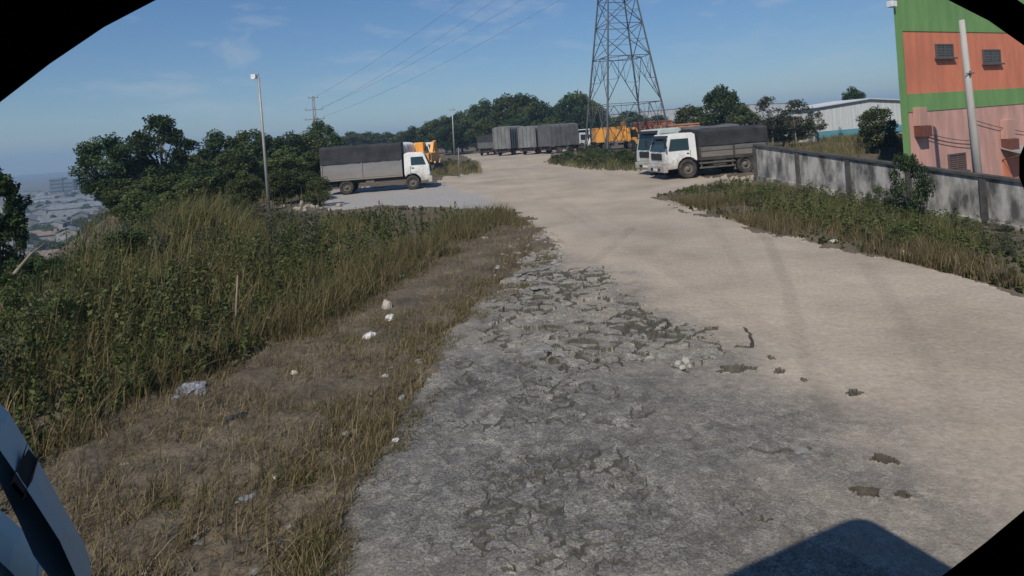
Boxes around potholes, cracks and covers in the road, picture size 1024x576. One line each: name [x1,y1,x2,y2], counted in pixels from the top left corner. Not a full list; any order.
pothole [716,364,758,374]
crack [451,445,667,576]
pothole [869,453,900,465]
crack [432,231,754,432]
pothole [848,486,880,498]
